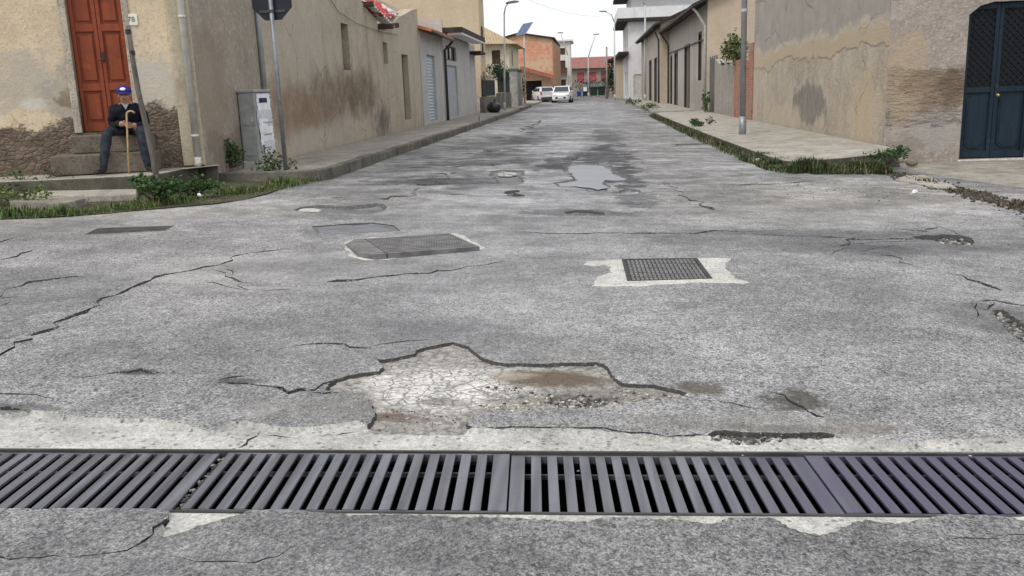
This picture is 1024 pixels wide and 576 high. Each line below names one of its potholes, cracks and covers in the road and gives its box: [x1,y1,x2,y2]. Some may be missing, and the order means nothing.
pothole [708,430,834,445]
pothole [325,342,687,436]
pothole [553,161,628,192]
manhole cover [85,226,173,235]
drain grate [182,453,510,512]
crack [288,339,430,349]
drain grate [508,455,845,514]
pothole [992,309,1024,343]
pothole [489,170,526,185]
drain grate [0,452,220,510]
drain grate [804,455,1024,515]
crack [0,237,289,356]
